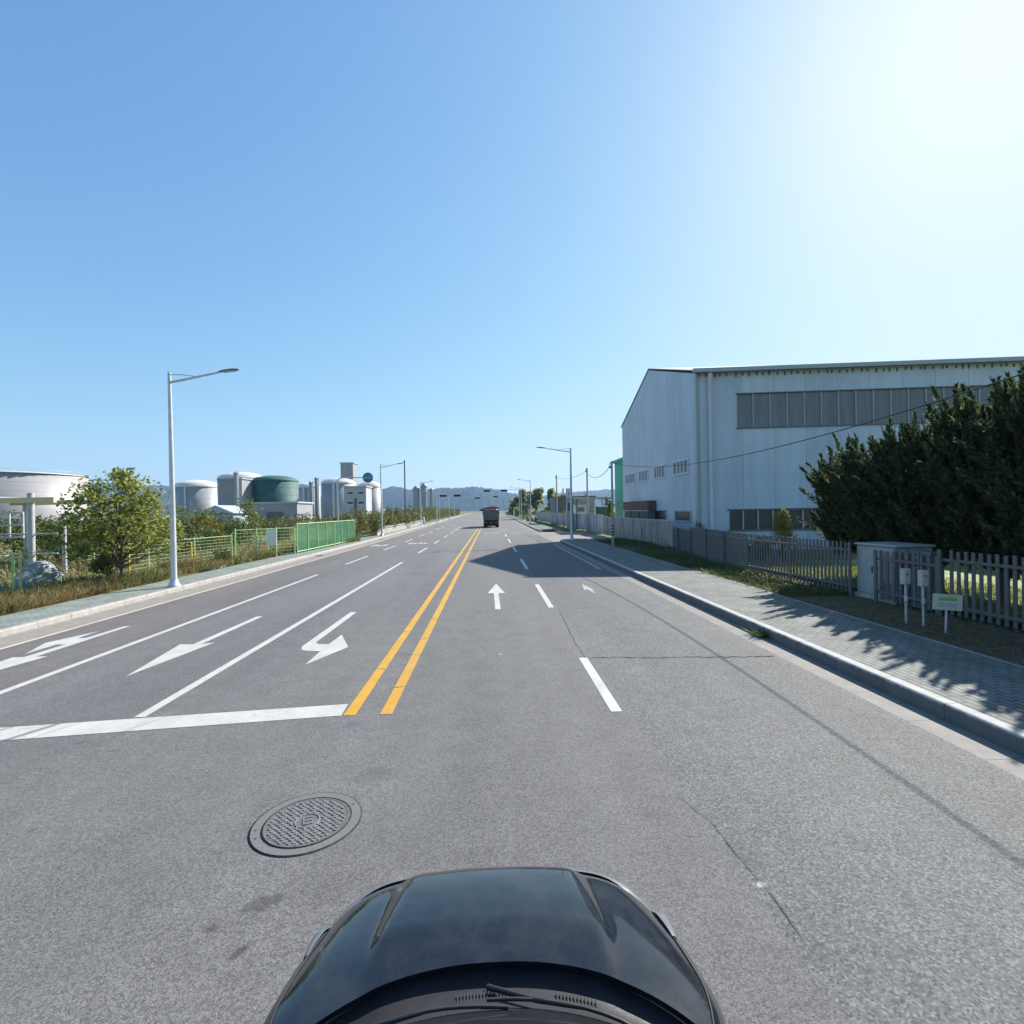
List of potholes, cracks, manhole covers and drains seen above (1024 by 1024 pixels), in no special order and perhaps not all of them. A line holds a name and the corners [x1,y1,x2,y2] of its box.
manhole cover [247,792,363,858]
crack [560,612,758,658]
